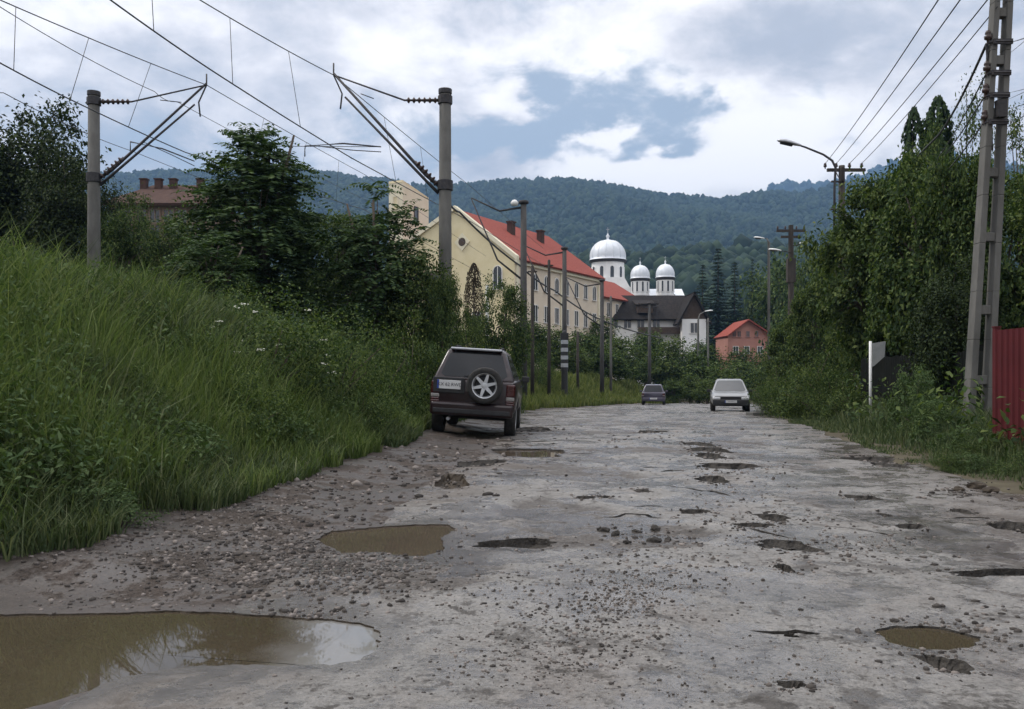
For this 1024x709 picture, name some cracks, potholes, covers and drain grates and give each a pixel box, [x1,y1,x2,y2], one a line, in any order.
pothole [752,514,791,522]
pothole [987,521,1024,534]
crack [609,505,662,518]
crack [750,629,820,638]
pothole [491,448,565,457]
pothole [434,473,470,489]
pothole [694,475,729,483]
pothole [874,625,981,650]
pothole [757,539,825,552]
pothole [315,524,455,556]
pothole [776,680,806,689]
pothole [472,538,557,549]
